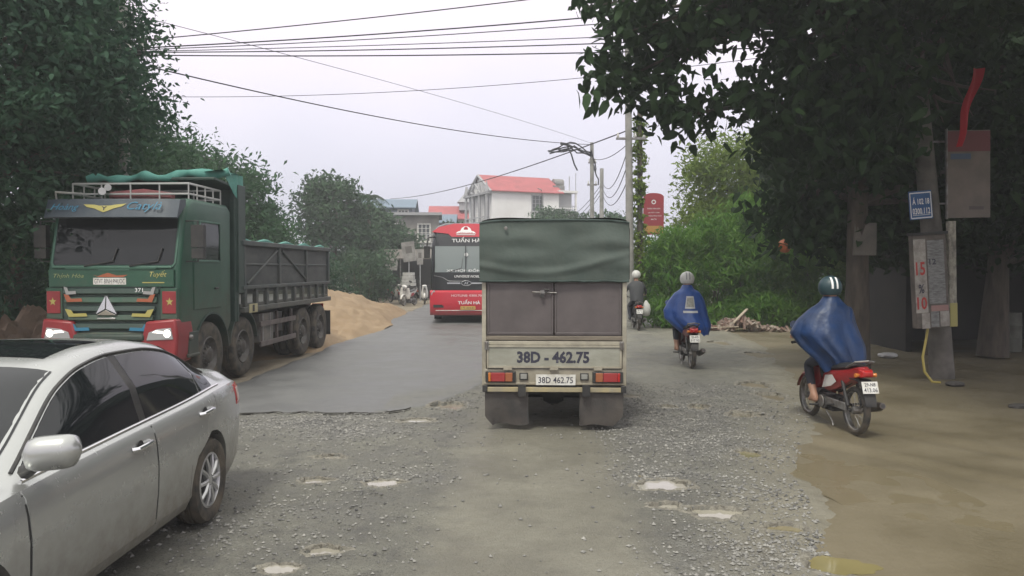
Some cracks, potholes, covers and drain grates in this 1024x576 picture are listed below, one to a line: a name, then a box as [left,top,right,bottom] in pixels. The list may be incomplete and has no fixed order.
pothole [255,562,306,576]
pothole [677,504,757,521]
pothole [749,520,819,534]
pothole [356,478,409,488]
pothole [628,477,701,492]
pothole [298,542,356,557]
pothole [794,551,884,576]
